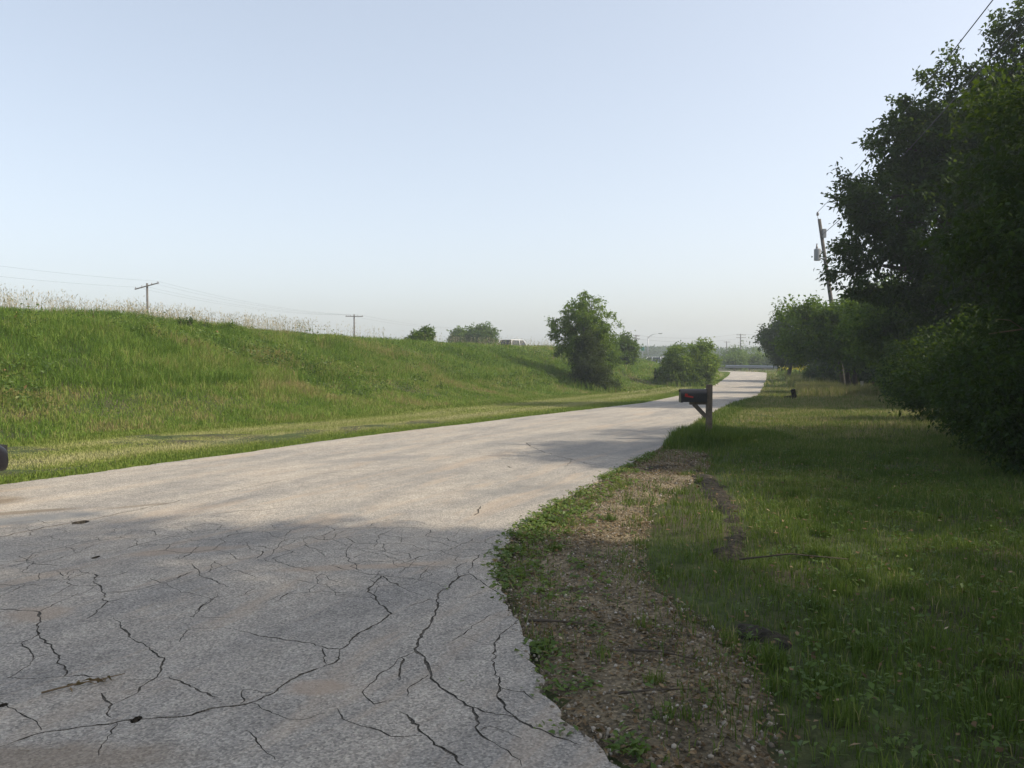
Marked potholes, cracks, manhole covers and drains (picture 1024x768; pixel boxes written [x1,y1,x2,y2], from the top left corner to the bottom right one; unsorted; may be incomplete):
crack [0,507,579,766]
